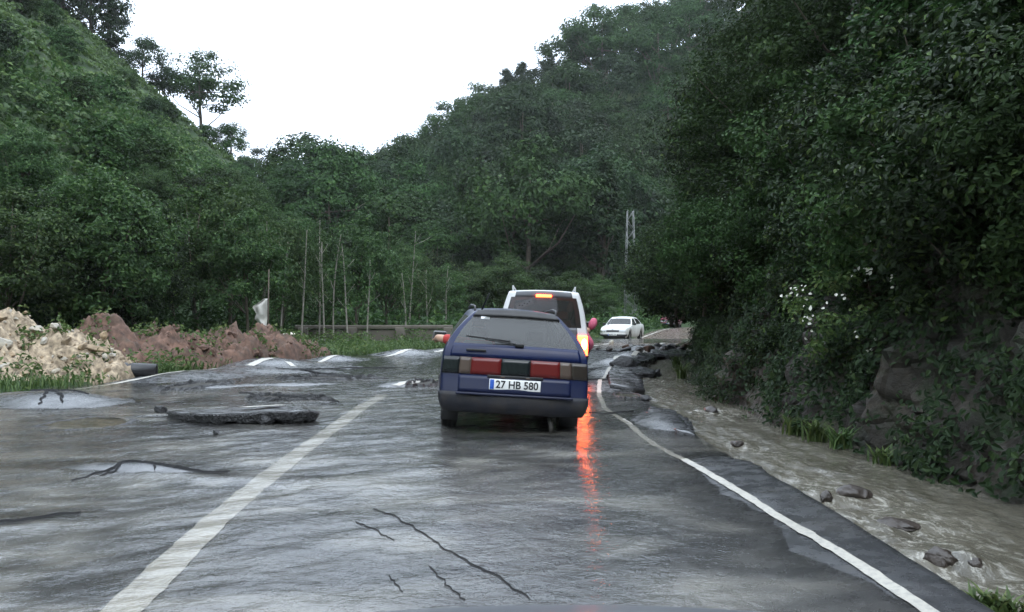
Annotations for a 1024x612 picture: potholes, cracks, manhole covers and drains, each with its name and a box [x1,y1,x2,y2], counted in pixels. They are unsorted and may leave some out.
pothole [613,392,641,400]
pothole [243,392,340,405]
crack [31,389,89,404]
crack [0,511,81,523]
pothole [27,416,144,435]
crack [355,508,530,604]
crack [71,460,230,483]
